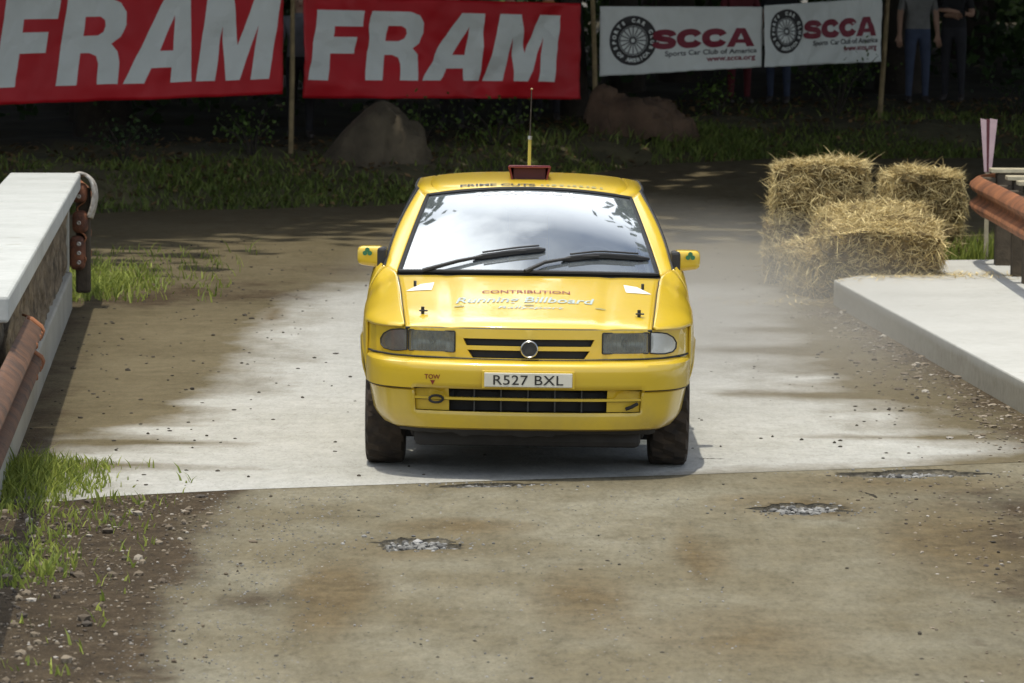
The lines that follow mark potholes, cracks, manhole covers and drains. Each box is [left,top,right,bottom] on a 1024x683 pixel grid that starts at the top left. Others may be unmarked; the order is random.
pothole [775,468,1024,482]
pothole [397,482,589,490]
pothole [333,531,495,558]
